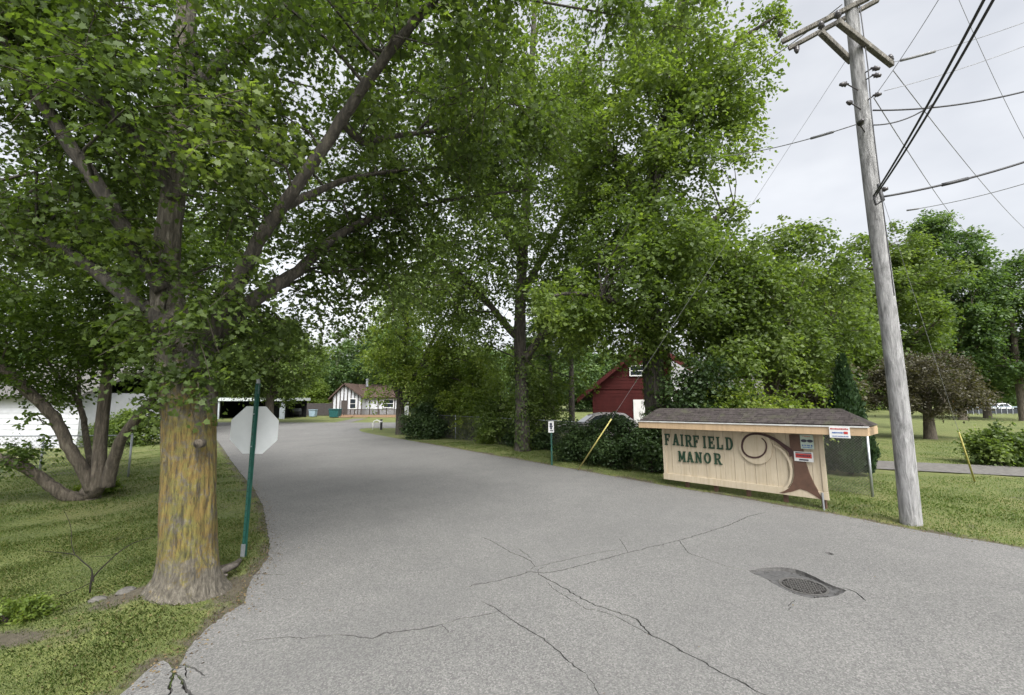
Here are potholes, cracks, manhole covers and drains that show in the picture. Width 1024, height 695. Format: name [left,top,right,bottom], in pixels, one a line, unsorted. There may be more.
crack [246,604,599,694]
crack [167,664,205,695]
crack [470,513,765,695]
manhole cover [779,577,830,595]
